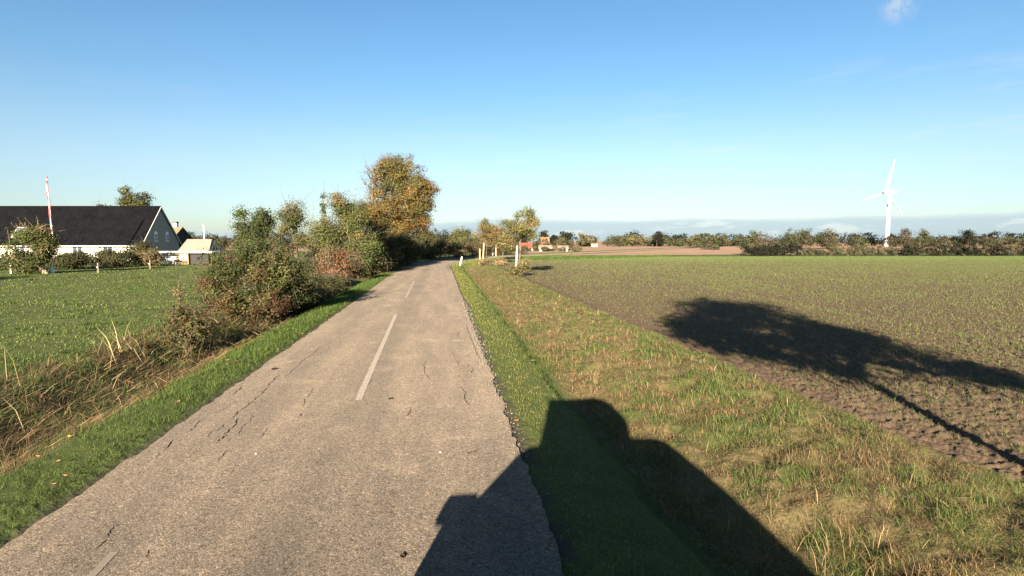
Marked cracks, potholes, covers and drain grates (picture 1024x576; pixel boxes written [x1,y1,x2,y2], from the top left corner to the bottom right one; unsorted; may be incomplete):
crack [453,325,479,406]
crack [190,348,319,473]
